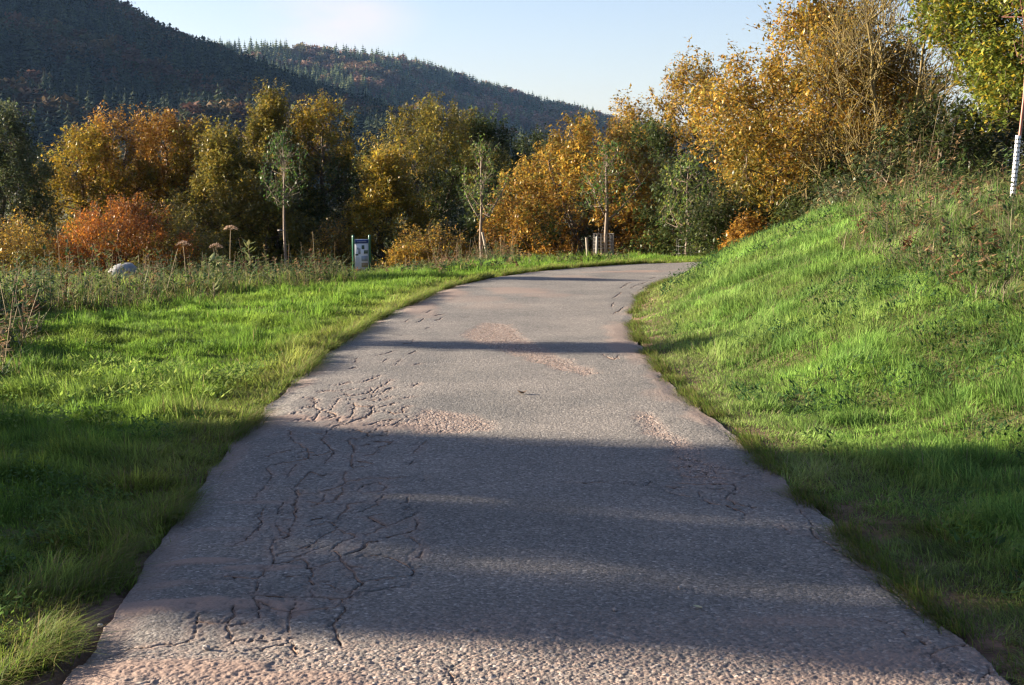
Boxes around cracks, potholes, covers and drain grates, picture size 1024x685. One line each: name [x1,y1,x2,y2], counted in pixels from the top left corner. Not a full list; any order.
crack [670,453,754,516]
